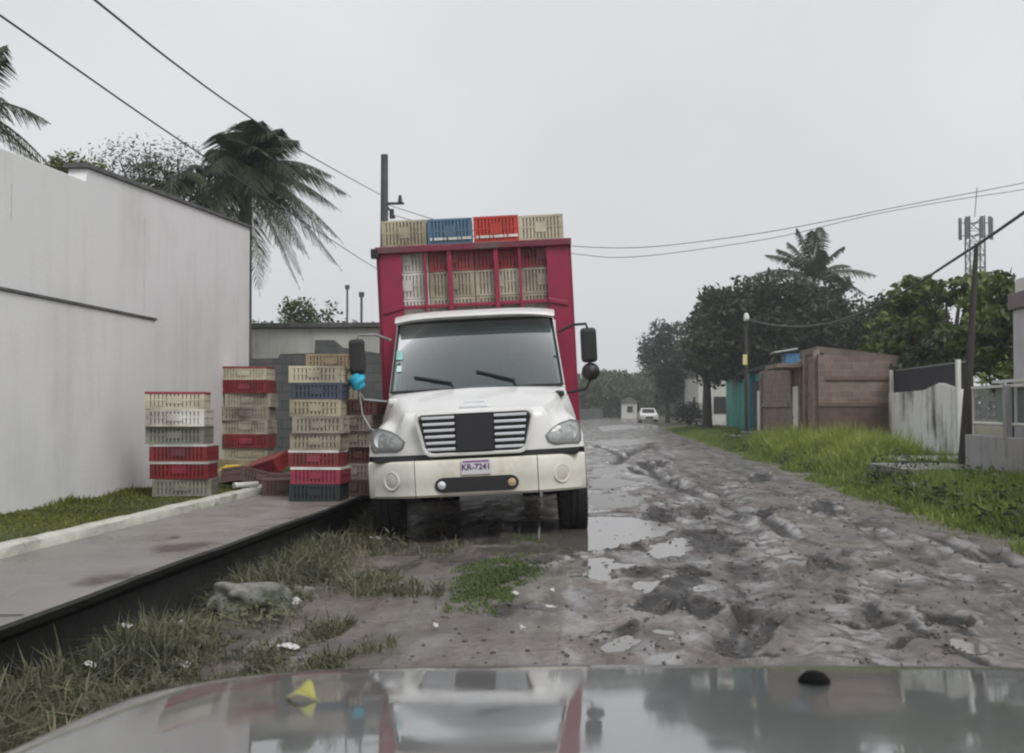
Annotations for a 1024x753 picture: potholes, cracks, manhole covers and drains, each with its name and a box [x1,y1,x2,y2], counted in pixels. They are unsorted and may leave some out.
pothole [669,593,726,620]
pothole [628,585,676,616]
